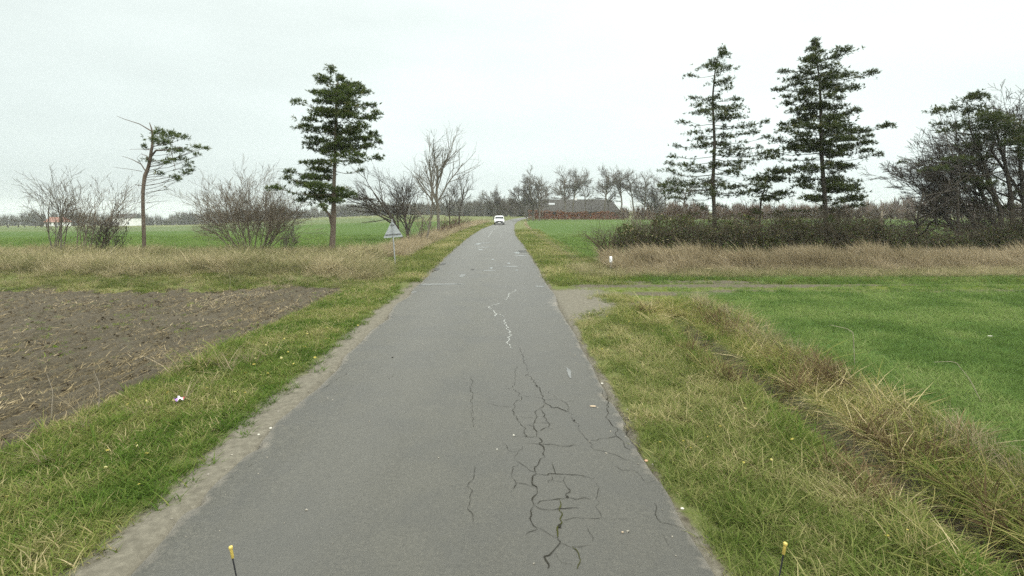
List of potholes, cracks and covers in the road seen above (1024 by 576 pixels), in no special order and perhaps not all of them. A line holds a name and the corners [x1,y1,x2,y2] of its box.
crack [470,290,643,568]
